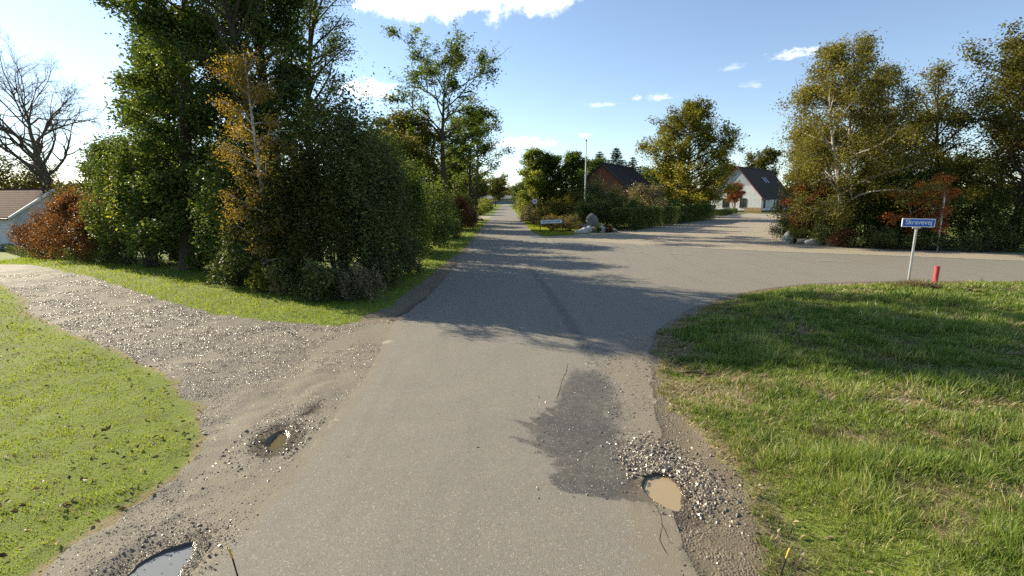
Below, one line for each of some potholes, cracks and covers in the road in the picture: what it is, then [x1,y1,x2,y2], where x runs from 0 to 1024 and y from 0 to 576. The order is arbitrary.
pothole [264,430,290,450]
pothole [127,540,196,576]
pothole [642,473,683,511]
